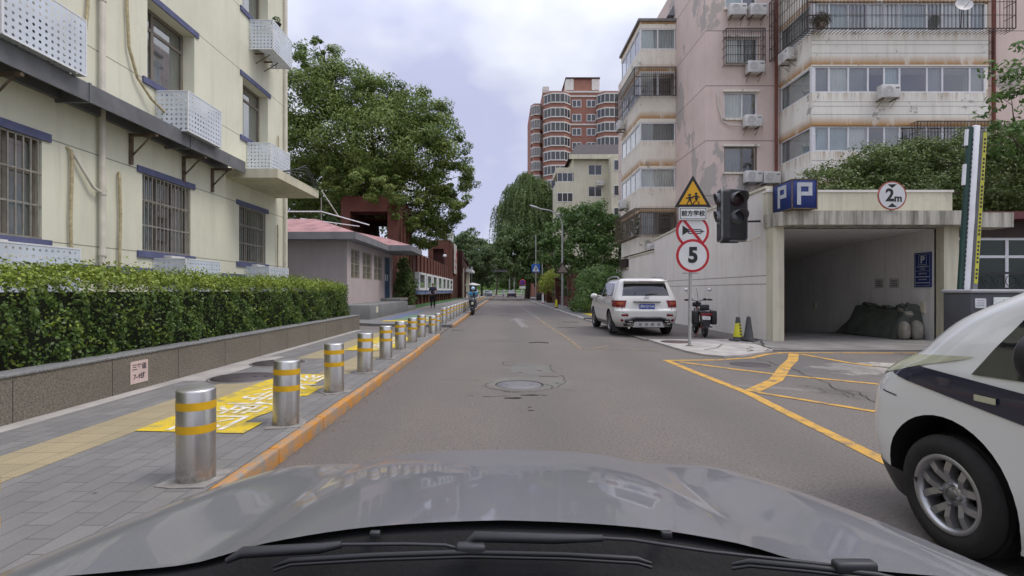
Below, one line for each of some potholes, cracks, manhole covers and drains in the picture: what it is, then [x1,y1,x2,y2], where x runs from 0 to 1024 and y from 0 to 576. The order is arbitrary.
manhole cover [495,380,544,389]
crack [469,361,577,397]
crack [745,346,875,402]
manhole cover [249,359,307,367]
manhole cover [206,372,273,384]
